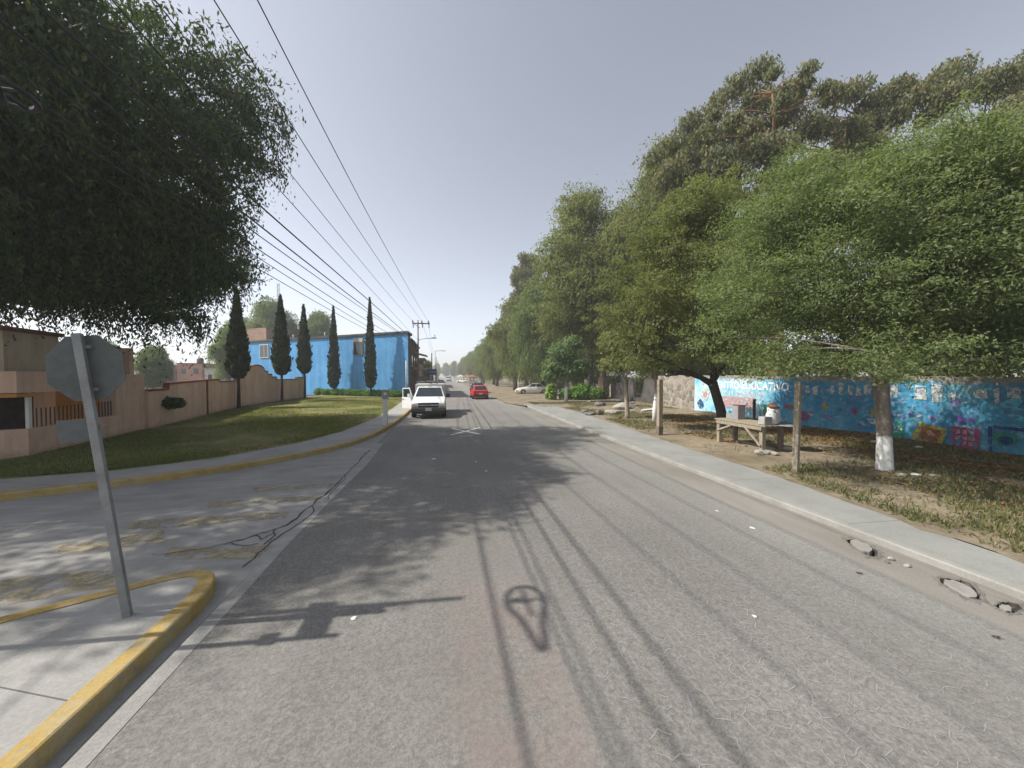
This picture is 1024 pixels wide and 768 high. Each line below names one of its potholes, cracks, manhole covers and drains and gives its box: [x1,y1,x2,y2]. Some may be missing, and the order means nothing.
pothole [989,600,1024,616]
crack [153,450,370,567]
pothole [932,575,990,605]
pothole [841,537,885,560]
